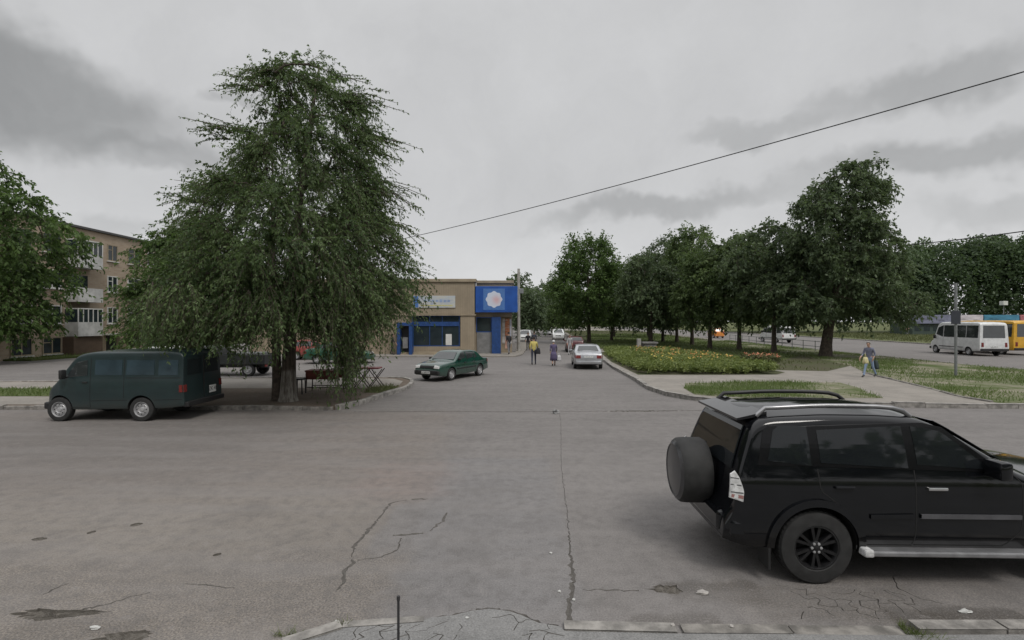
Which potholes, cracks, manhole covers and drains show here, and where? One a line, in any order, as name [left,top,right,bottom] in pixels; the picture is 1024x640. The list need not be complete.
pothole [91,630,152,640]
crack [336,498,447,591]
crack [352,607,565,640]
pothole [10,608,109,621]
crack [43,583,150,609]
crack [791,576,943,619]
pothole [649,585,683,595]
